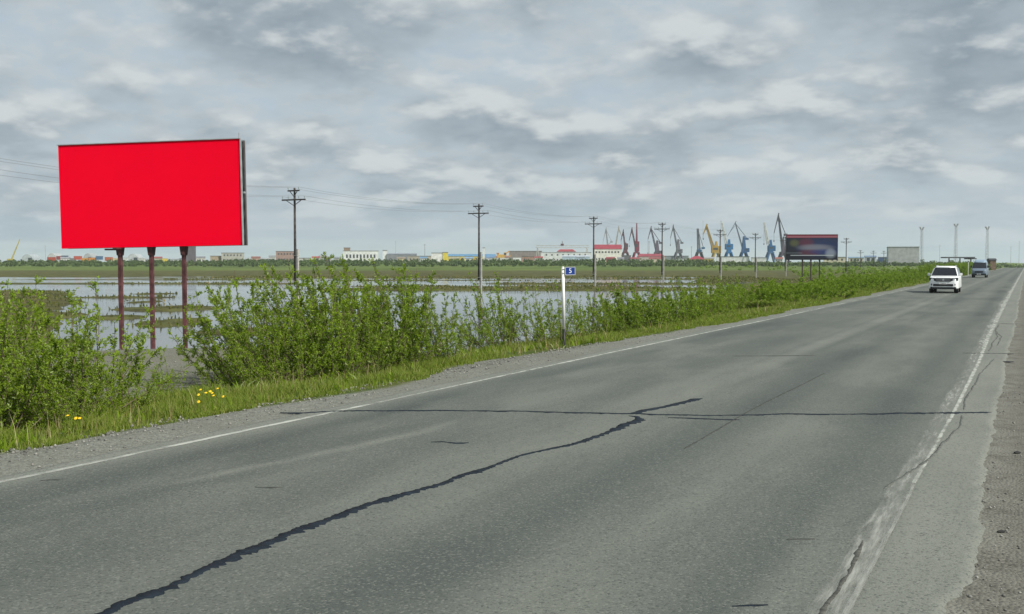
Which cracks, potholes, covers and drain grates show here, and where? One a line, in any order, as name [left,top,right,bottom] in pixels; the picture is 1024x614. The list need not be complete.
crack [787,538,863,614]
crack [884,325,1014,489]
crack [684,374,823,449]
